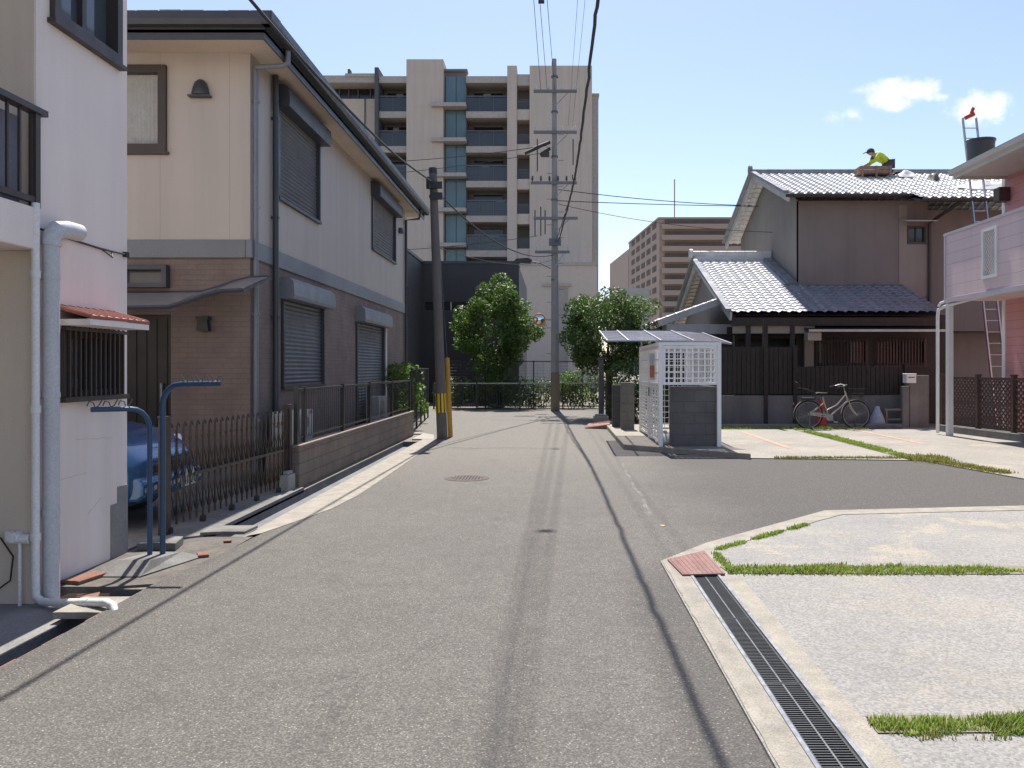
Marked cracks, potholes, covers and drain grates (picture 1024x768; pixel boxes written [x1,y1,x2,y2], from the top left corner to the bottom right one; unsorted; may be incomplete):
drain grate [766,683,866,768]
drain grate [722,618,800,683]
drain grate [694,576,749,618]
